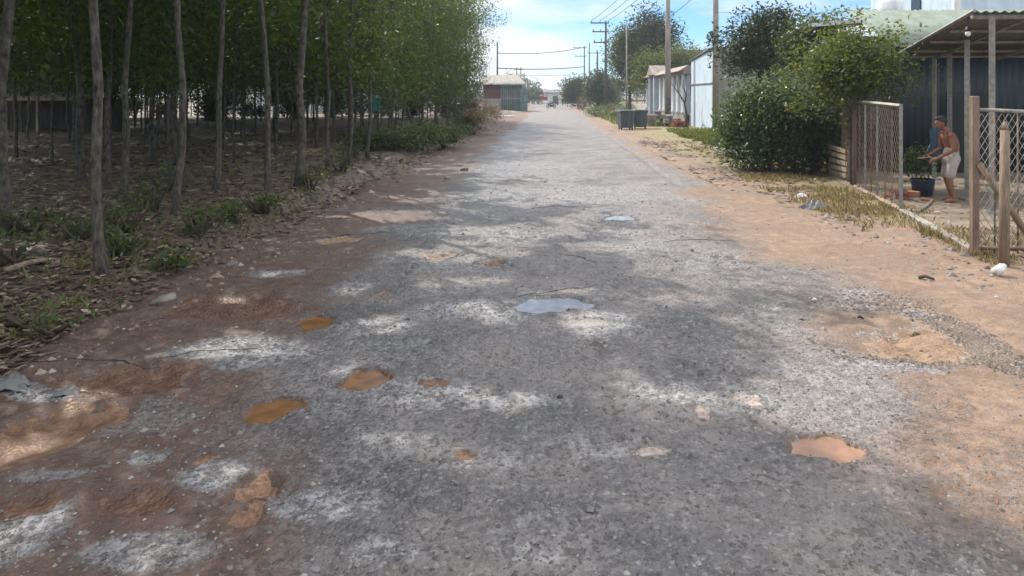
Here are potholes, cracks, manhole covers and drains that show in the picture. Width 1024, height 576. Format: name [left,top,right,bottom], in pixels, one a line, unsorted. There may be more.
pothole [453,452,477,461]
pothole [0,398,129,471]
pothole [420,379,450,389]
pothole [228,499,266,528]
pothole [244,397,308,424]
pothole [478,257,505,266]
pothole [231,470,278,503]
pothole [338,370,395,391]
crack [20,348,262,369]
pothole [852,322,976,365]
pothole [790,435,867,463]
pothole [421,251,454,261]
